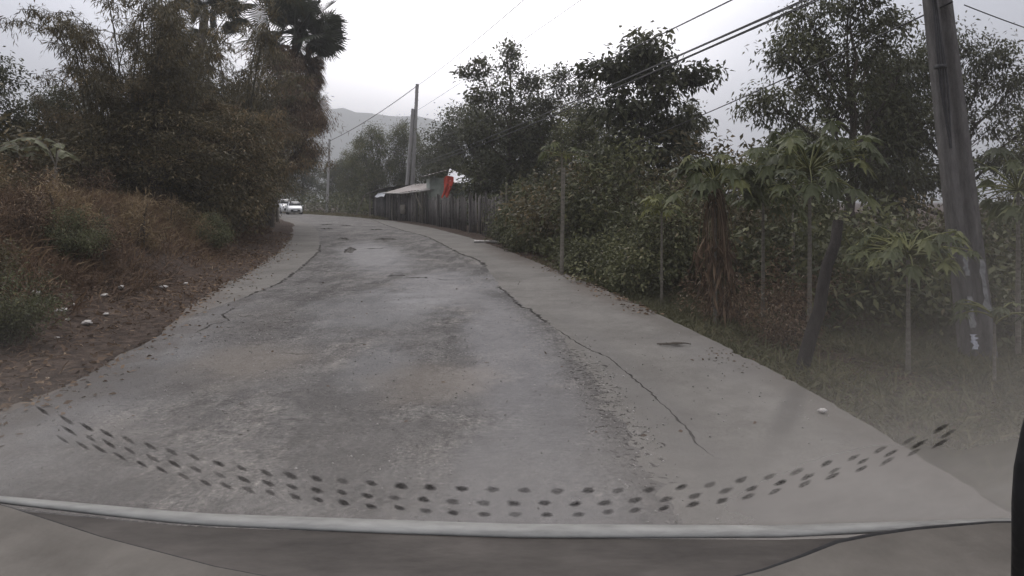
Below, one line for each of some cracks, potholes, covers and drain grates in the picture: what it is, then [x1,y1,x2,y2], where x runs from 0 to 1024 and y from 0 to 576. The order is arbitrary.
crack [196,245,321,339]
crack [371,219,488,280]
crack [497,286,713,485]
